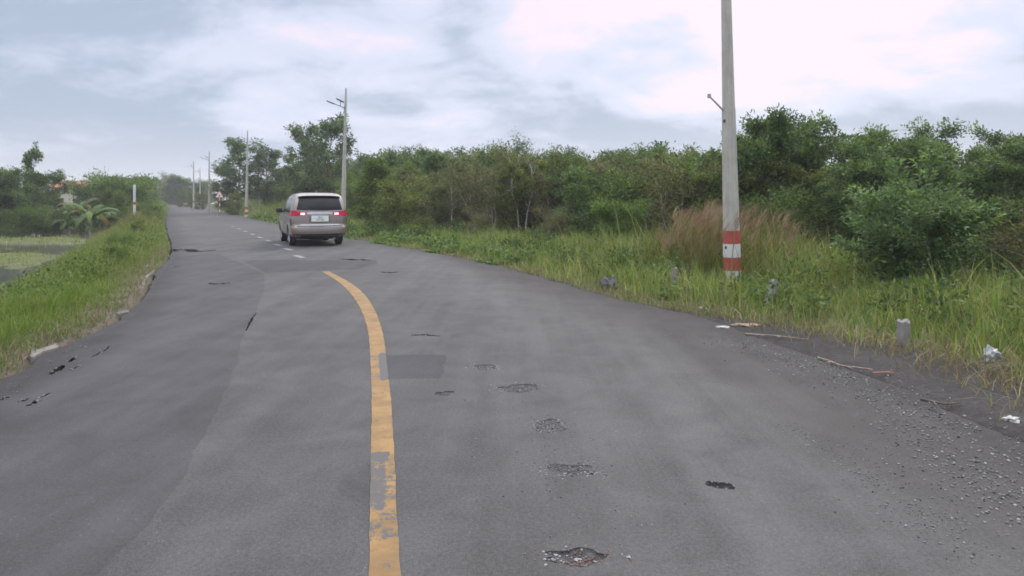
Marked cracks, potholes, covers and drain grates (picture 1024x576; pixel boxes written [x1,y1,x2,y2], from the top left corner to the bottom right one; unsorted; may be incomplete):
pothole [705,481,735,490]
pothole [523,544,632,569]
crack [48,344,114,375]
pothole [525,416,576,437]
pothole [485,382,556,395]
pothole [524,459,617,480]
